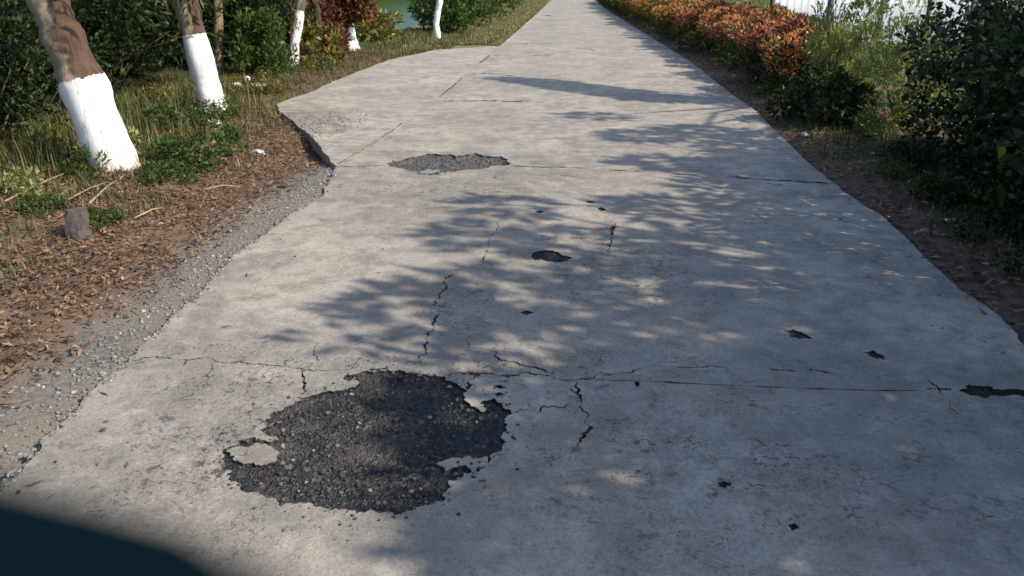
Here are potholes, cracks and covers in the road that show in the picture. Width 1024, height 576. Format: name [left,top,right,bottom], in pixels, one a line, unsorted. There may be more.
pothole [787,329,813,339]
pothole [959,384,1024,398]
pothole [387,152,516,175]
crack [517,166,827,185]
crack [170,214,639,448]
crack [125,356,173,368]
pothole [531,250,573,263]
pothole [198,356,537,542]
